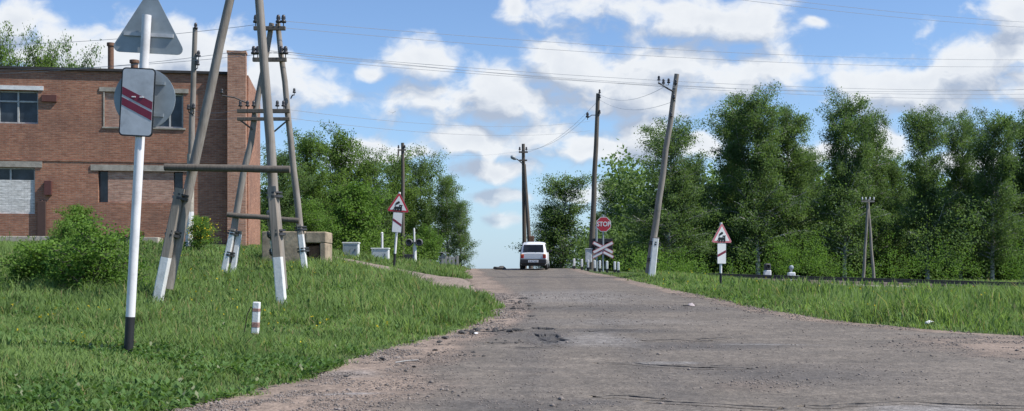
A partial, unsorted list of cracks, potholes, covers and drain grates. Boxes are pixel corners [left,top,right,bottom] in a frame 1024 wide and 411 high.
pothole [525,331,579,346]
crack [805,400,1024,409]
crack [591,393,780,410]
